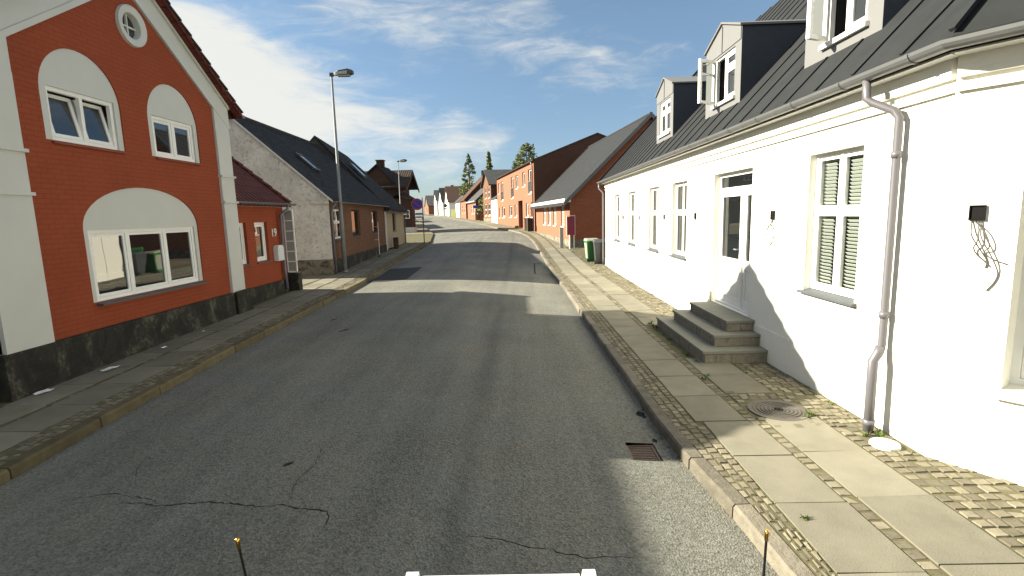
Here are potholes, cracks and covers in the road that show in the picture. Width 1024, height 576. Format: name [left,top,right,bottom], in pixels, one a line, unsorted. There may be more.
crack [84,451,329,536]
manhole cover [747,399,812,421]
drain grate [626,445,662,461]
crack [454,535,632,559]
